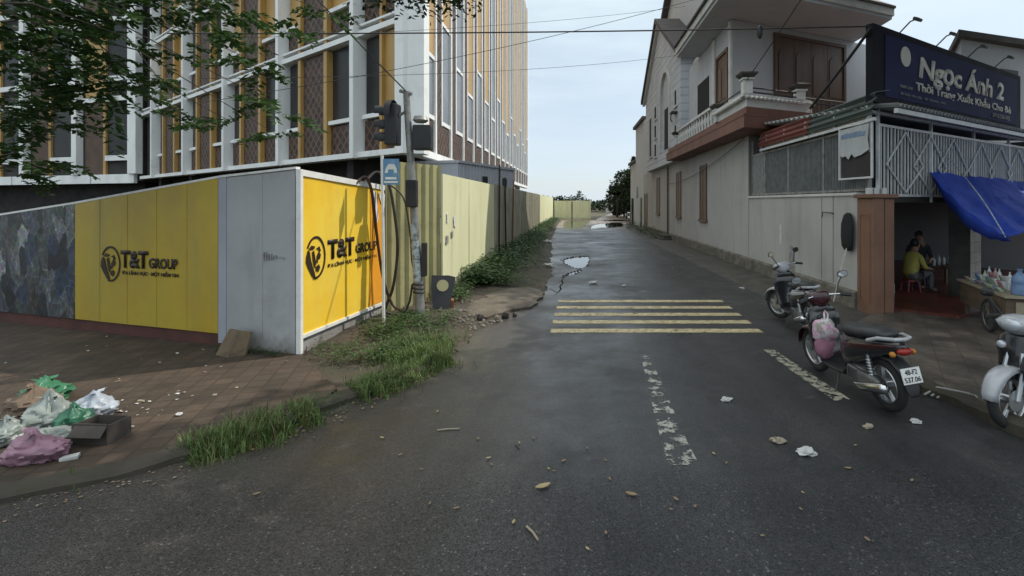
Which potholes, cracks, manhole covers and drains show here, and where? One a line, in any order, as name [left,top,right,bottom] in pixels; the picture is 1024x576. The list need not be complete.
pothole [561,256,590,269]
